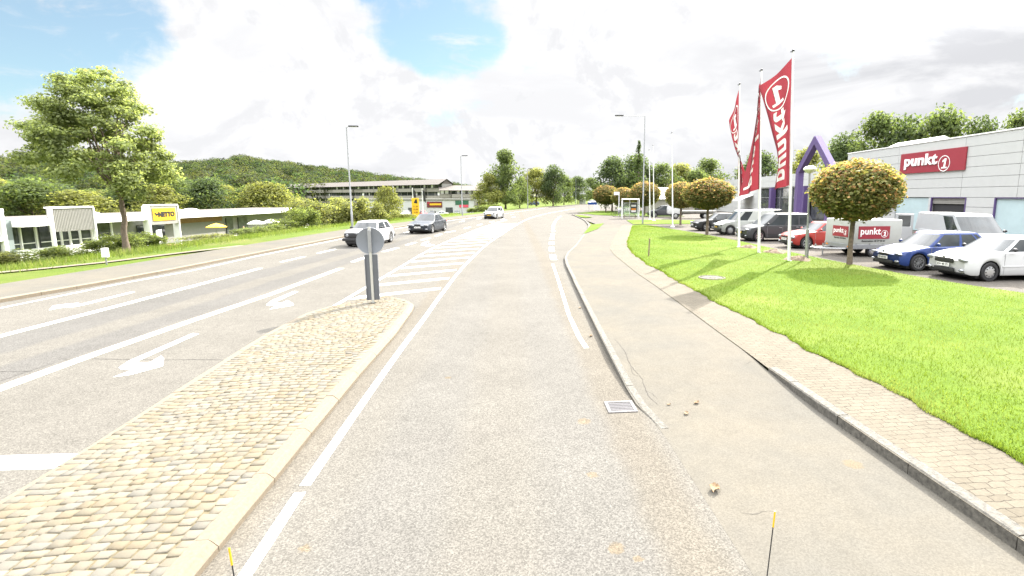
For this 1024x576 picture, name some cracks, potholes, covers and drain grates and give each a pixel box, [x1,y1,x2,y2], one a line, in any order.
drain grate [604,400,638,413]
